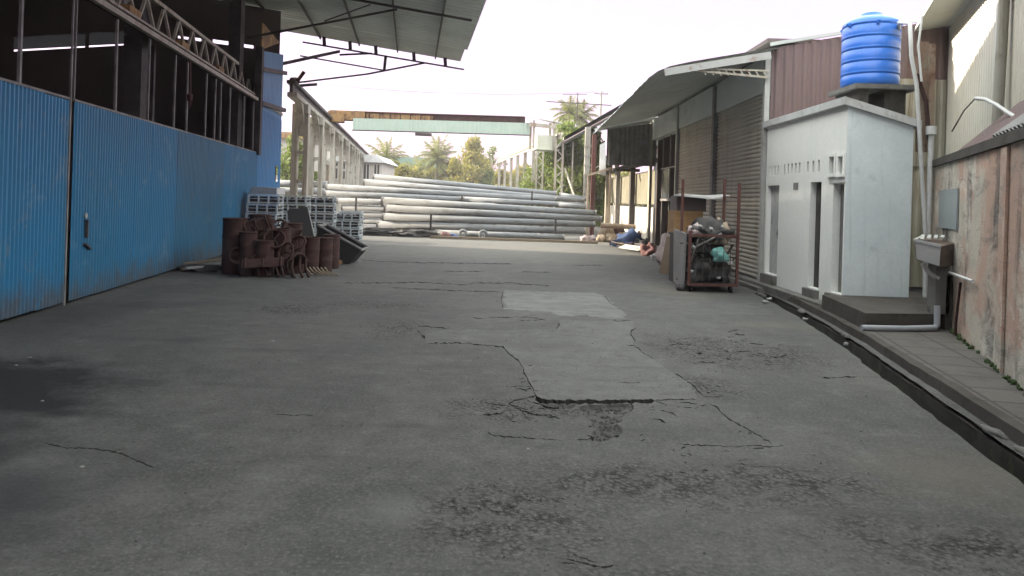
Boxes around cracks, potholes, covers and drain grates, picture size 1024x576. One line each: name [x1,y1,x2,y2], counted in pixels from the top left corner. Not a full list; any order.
pothole [579,403,634,442]
crack [46,443,154,468]
crack [414,322,786,474]
